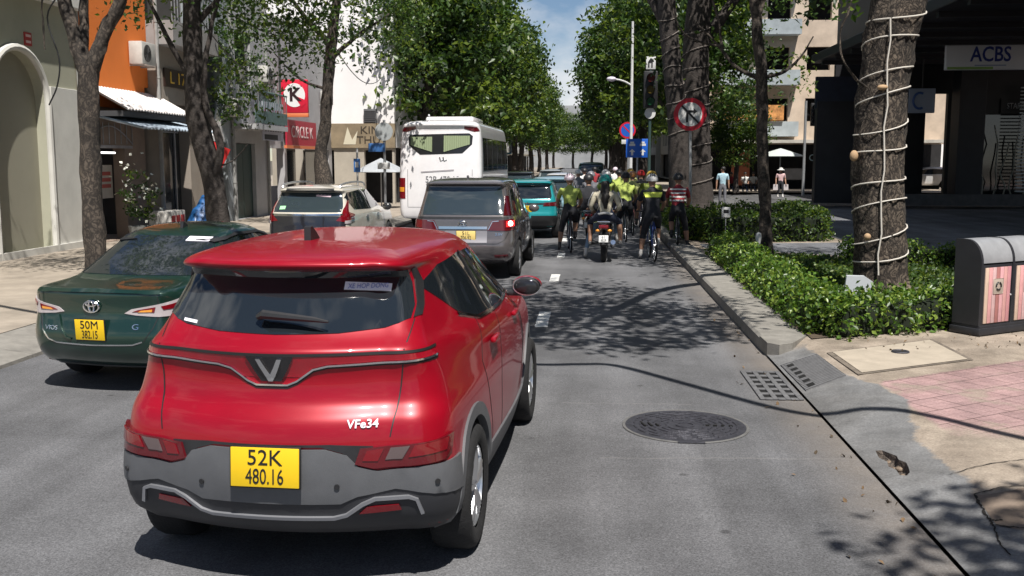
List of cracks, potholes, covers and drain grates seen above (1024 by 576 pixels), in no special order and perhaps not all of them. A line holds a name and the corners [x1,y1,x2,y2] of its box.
utility cover [827,339,973,375]
drain grate [740,370,804,400]
drain grate [780,353,846,391]
crack [948,459,1024,555]
manhole cover [622,410,750,444]
